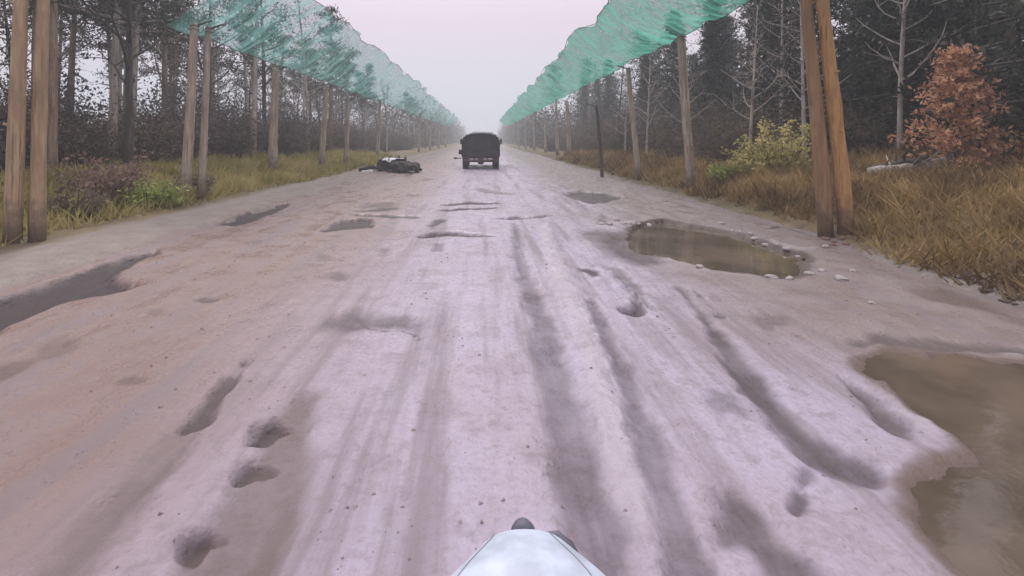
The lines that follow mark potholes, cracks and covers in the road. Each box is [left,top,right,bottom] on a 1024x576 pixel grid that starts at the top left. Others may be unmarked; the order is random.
pothole [144,521,238,569]
pothole [210,202,299,228]
pothole [406,229,503,240]
pothole [197,453,283,491]
pothole [609,292,658,321]
pothole [0,247,175,340]
pothole [557,189,633,205]
pothole [220,411,297,450]
pothole [312,217,384,234]
